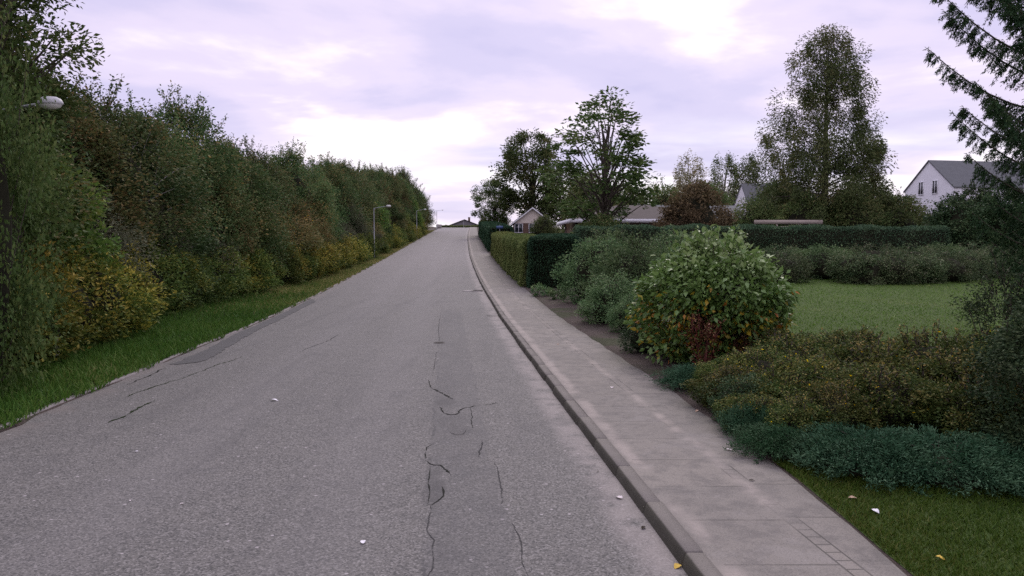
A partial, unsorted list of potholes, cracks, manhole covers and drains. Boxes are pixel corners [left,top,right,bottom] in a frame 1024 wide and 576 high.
crack [425,445,450,576]
crack [108,359,235,423]
crack [428,319,503,504]
